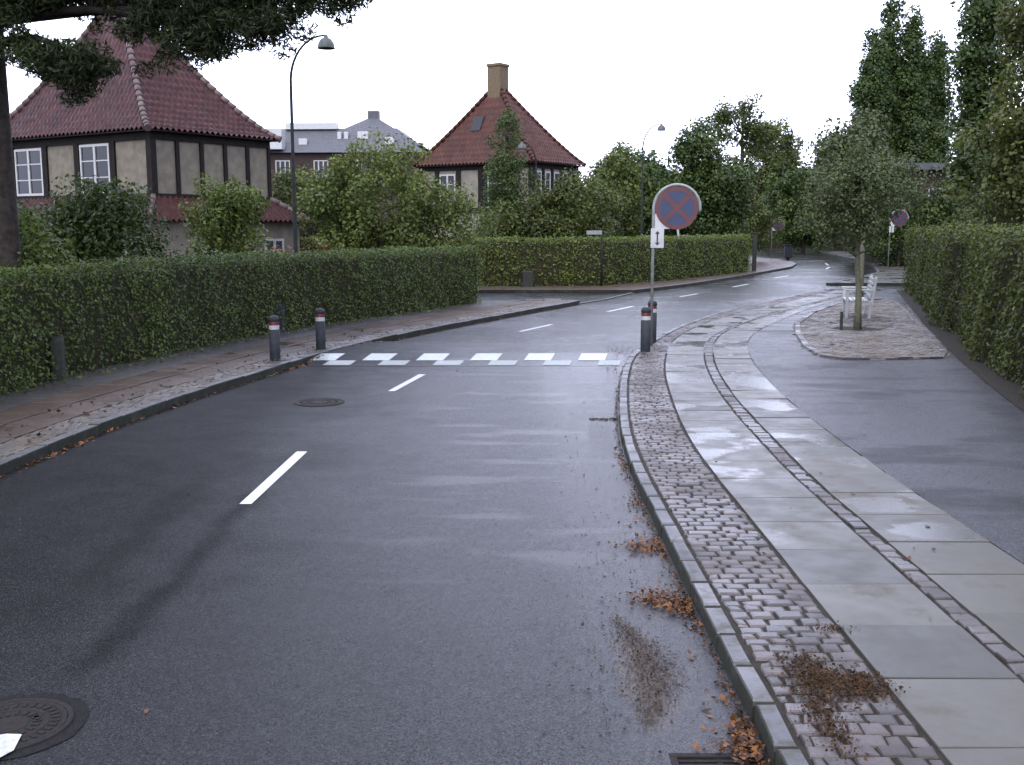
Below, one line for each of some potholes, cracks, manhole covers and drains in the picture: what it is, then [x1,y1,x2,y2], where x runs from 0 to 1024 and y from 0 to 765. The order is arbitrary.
manhole cover [0,693,89,760]
manhole cover [294,398,345,406]
drain grate [669,753,771,765]
